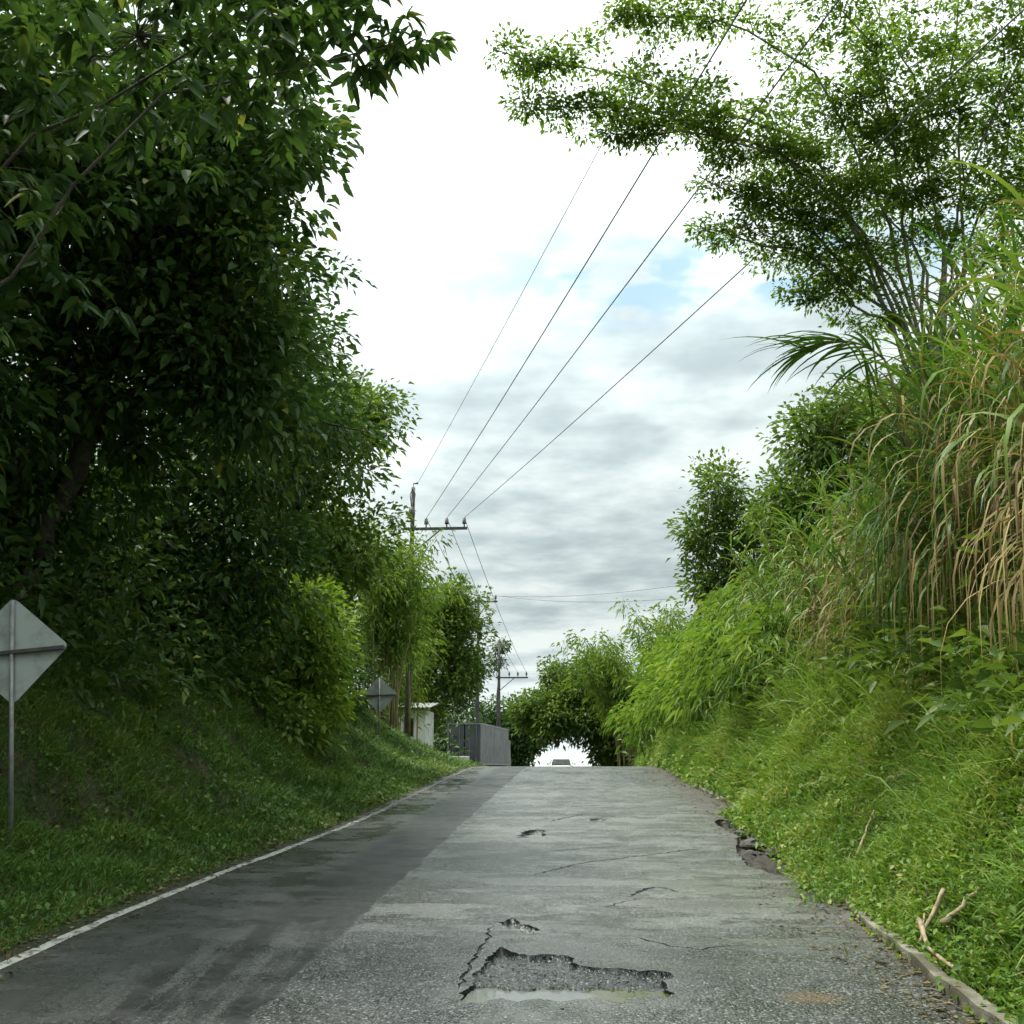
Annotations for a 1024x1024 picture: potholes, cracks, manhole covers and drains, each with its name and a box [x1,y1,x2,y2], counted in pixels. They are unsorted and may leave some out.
pothole [517,829,546,838]
crack [604,887,677,908]
crack [458,926,494,990]
crack [530,846,710,876]
crack [631,936,726,950]
pothole [714,819,793,876]
pothole [499,918,539,934]
